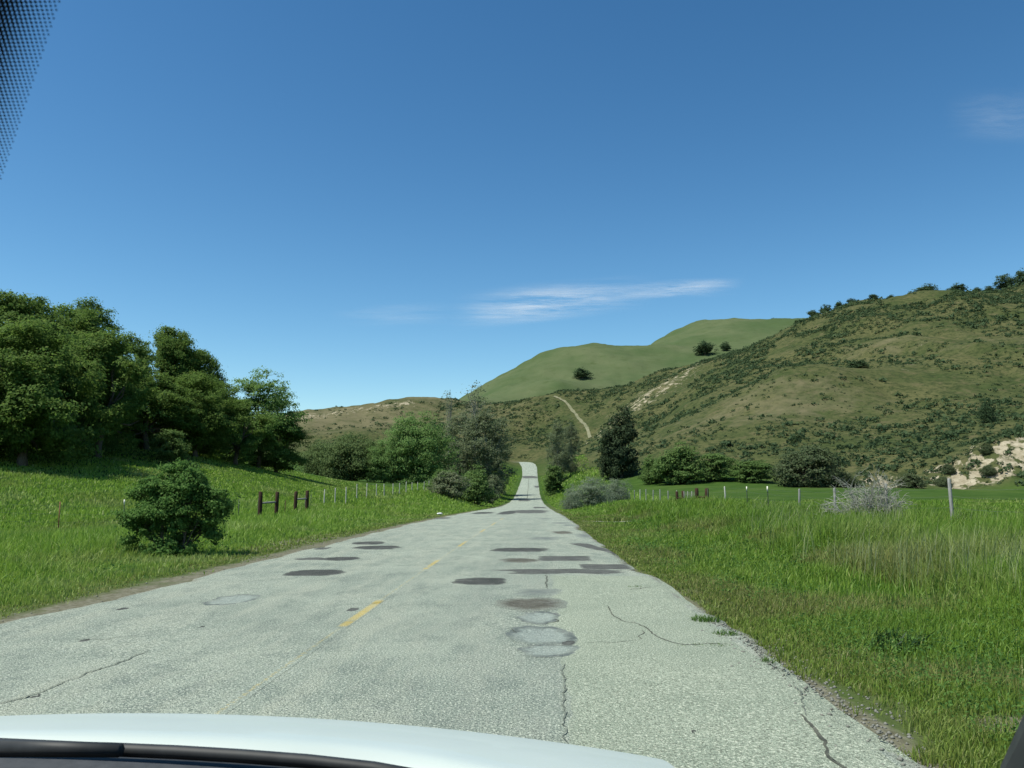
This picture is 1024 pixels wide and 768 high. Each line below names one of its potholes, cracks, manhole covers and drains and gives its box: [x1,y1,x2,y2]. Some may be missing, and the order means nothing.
crack [771,663,847,768]
crack [586,606,724,645]
